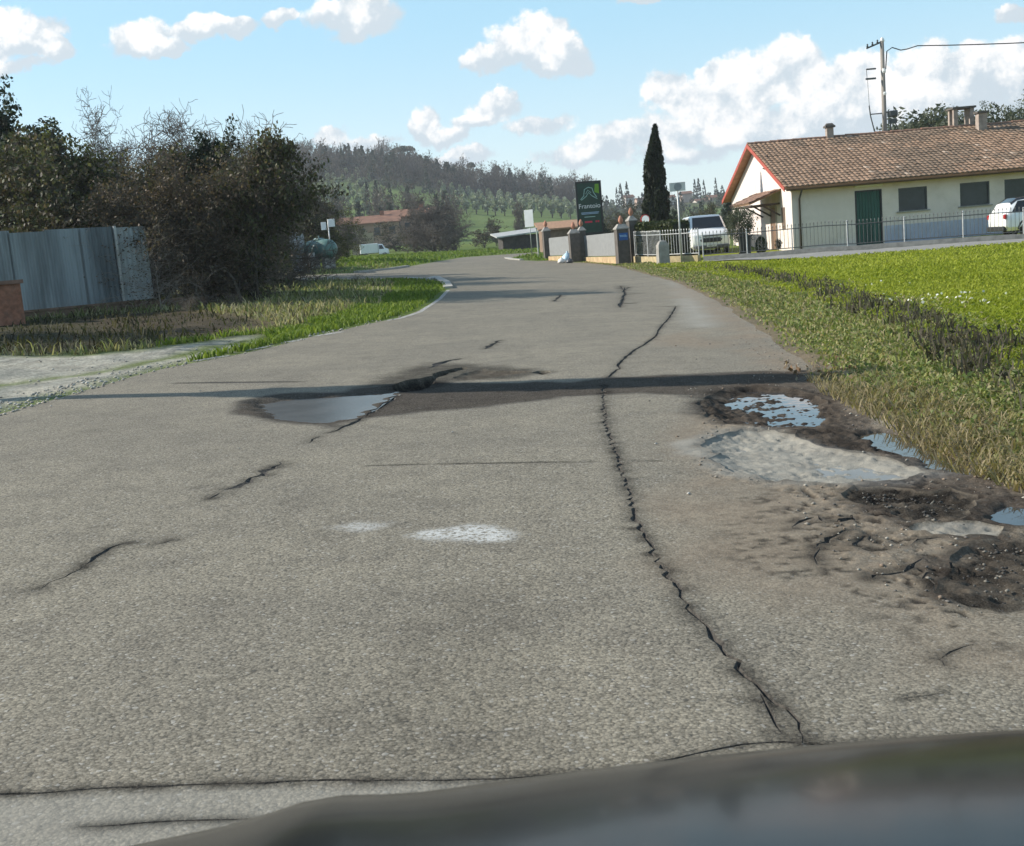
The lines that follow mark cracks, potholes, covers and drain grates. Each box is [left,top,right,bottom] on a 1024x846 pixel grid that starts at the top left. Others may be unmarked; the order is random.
pothole [389,367,467,392]
pothole [695,386,841,427]
crack [0,286,952,795]
pothole [908,520,1004,536]
pothole [841,485,978,522]
pothole [934,537,1024,614]
pothole [700,429,924,483]
